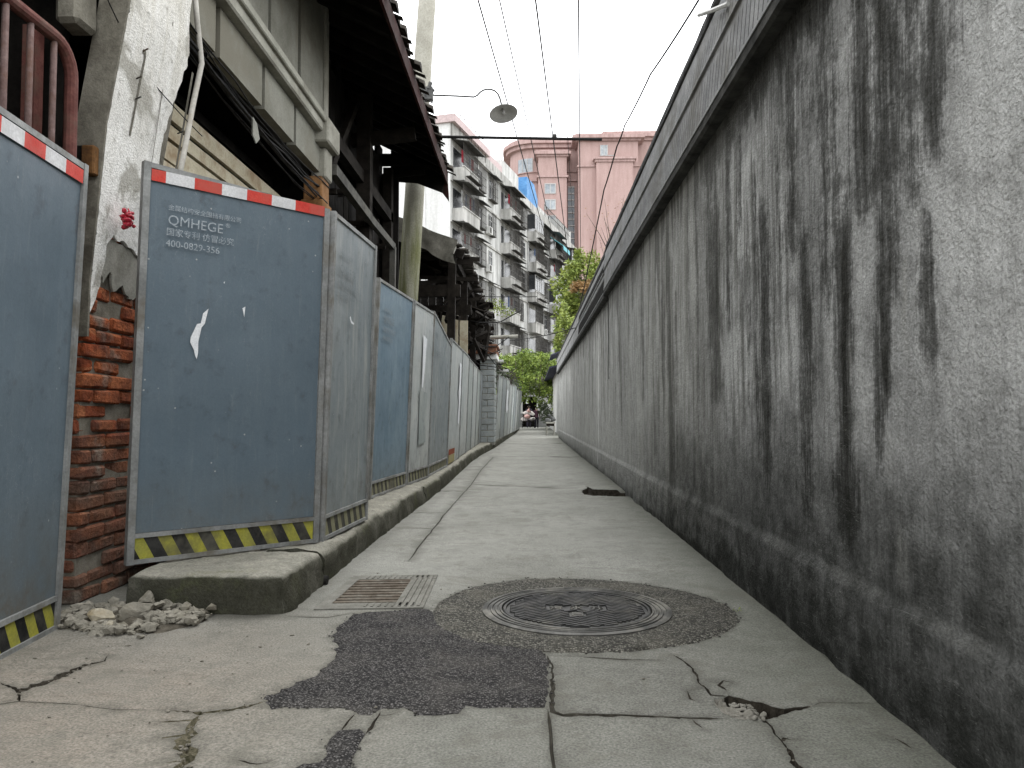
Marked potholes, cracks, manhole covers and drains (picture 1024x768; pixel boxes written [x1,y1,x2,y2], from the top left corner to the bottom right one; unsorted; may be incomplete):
crack [161,701,265,768]
crack [674,655,732,701]
crack [1,657,107,702]
crack [764,720,803,768]
drain grate [314,575,438,616]
pothole [582,487,625,496]
manhole cover [482,587,672,636]
pothole [714,696,811,719]
